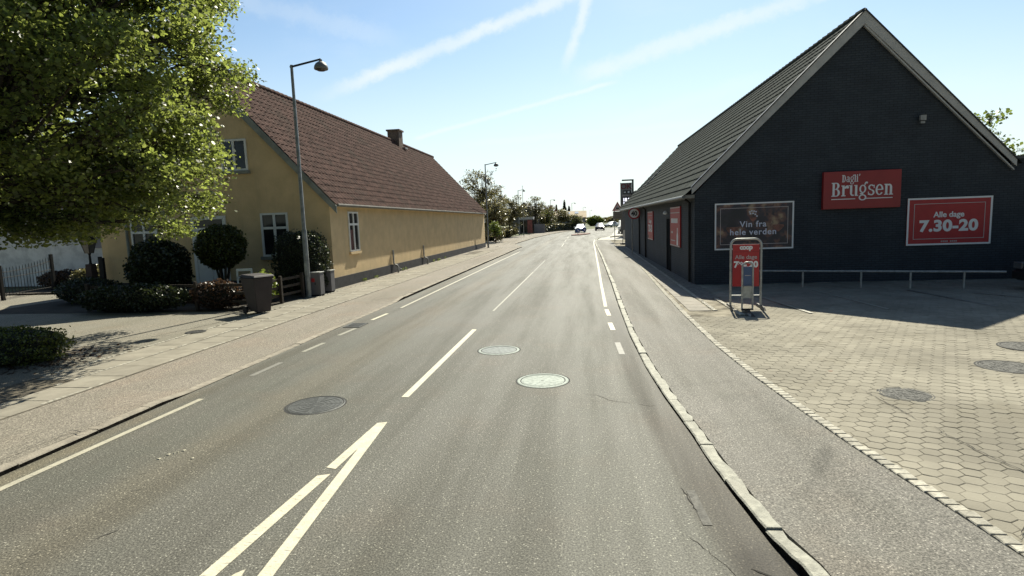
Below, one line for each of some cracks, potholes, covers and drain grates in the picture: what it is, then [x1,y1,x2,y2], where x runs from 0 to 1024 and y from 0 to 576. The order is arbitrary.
manhole cover [876,387,935,402]
manhole cover [996,341,1024,351]
manhole cover [974,360,1024,374]
manhole cover [283,396,347,415]
manhole cover [516,373,570,388]
manhole cover [477,345,521,355]
